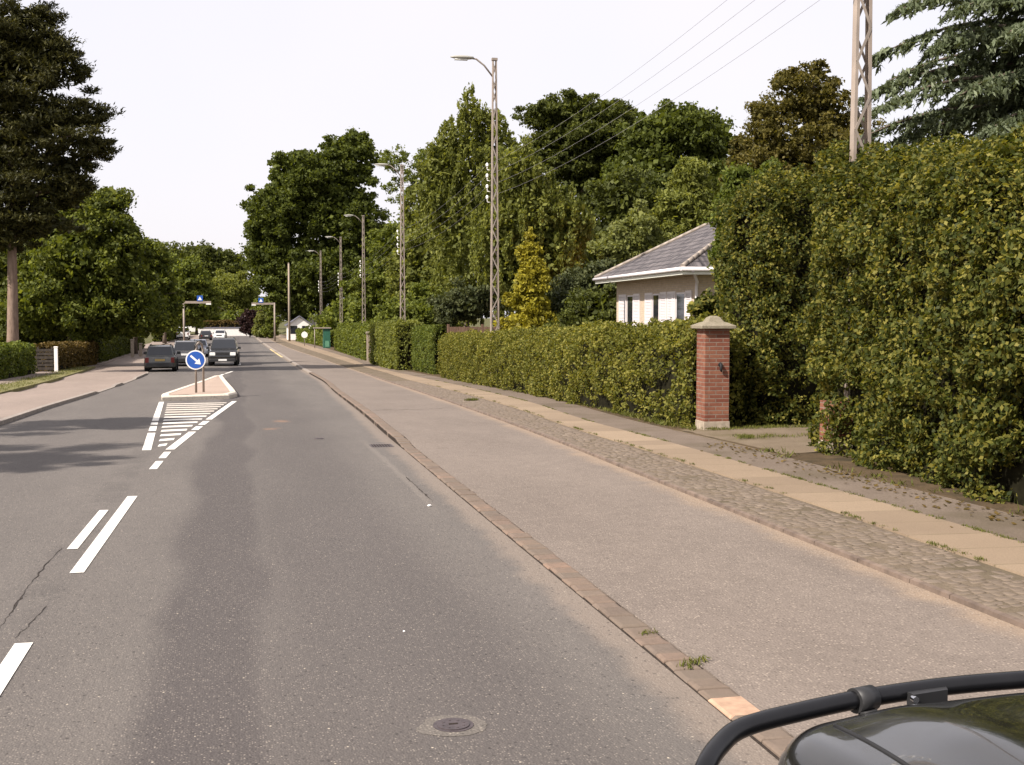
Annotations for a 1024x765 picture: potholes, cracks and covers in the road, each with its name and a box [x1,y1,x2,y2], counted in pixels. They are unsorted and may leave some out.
crack [0,548,62,638]
manhole cover [416,715,488,736]
